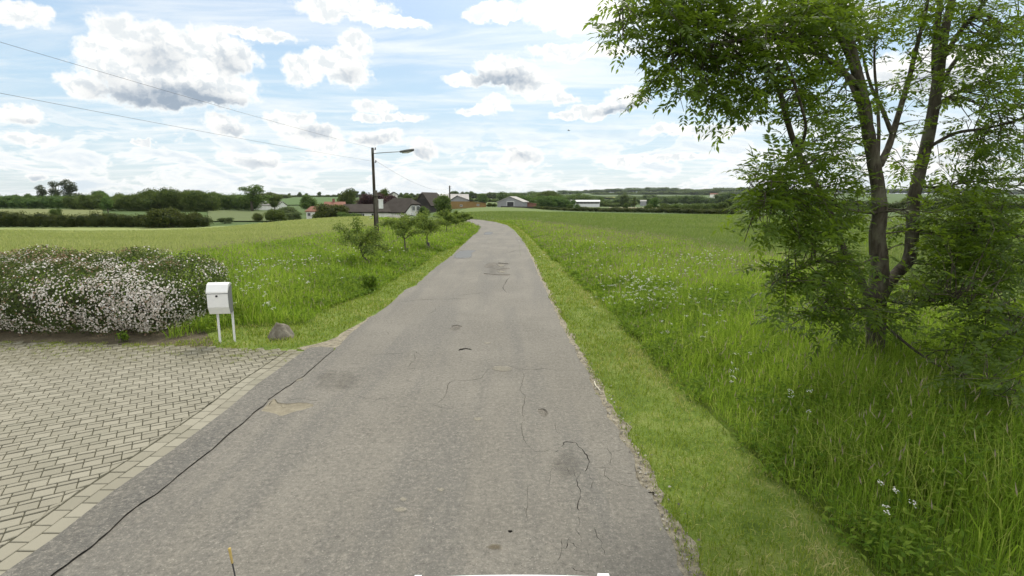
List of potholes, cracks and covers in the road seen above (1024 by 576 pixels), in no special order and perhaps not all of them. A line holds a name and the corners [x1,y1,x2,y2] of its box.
crack [435,365,639,573]
